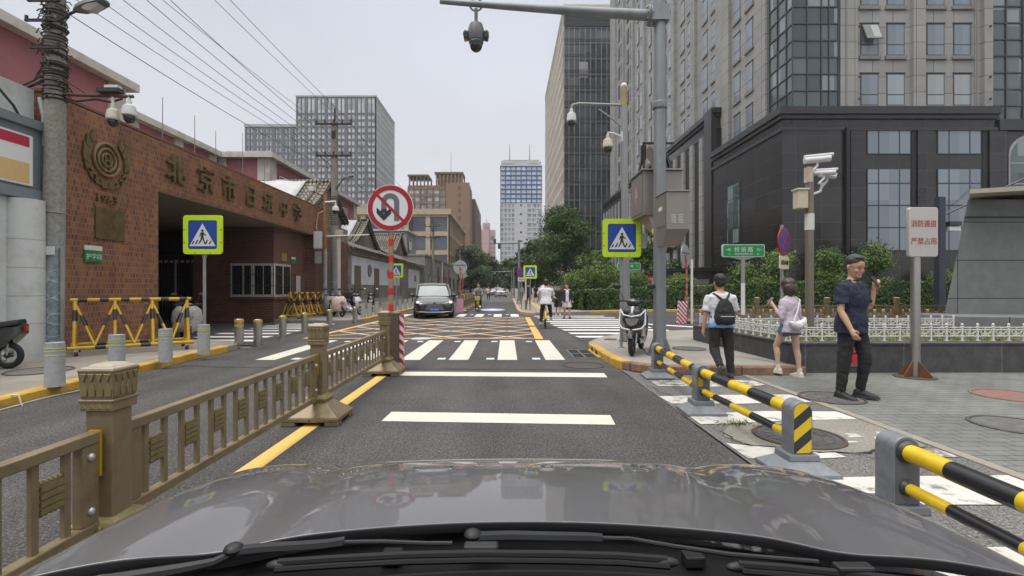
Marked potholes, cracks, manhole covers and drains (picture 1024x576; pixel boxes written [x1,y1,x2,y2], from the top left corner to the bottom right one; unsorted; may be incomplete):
manhole cover [968,388,1024,402]
manhole cover [751,424,849,450]
drain grate [566,350,598,358]
manhole cover [1,366,76,376]
manhole cover [797,391,868,405]
manhole cover [965,415,1024,434]
